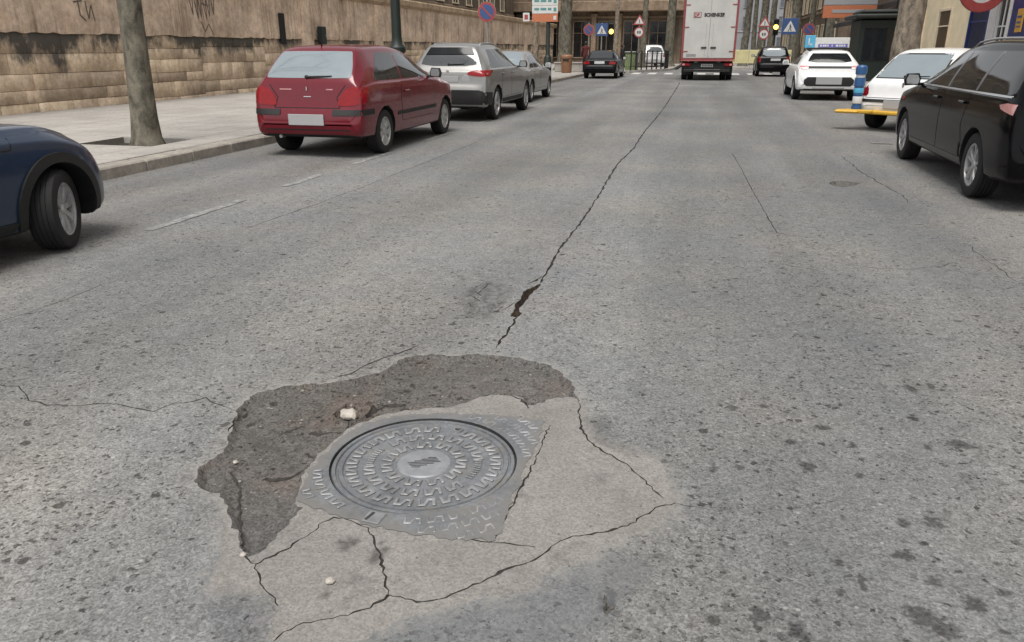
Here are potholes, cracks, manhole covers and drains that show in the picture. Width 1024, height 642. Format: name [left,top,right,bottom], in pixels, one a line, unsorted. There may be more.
manhole cover [297,413,545,542]
crack [467,83,680,348]
crack [855,243,1022,284]
crack [0,384,715,642]
